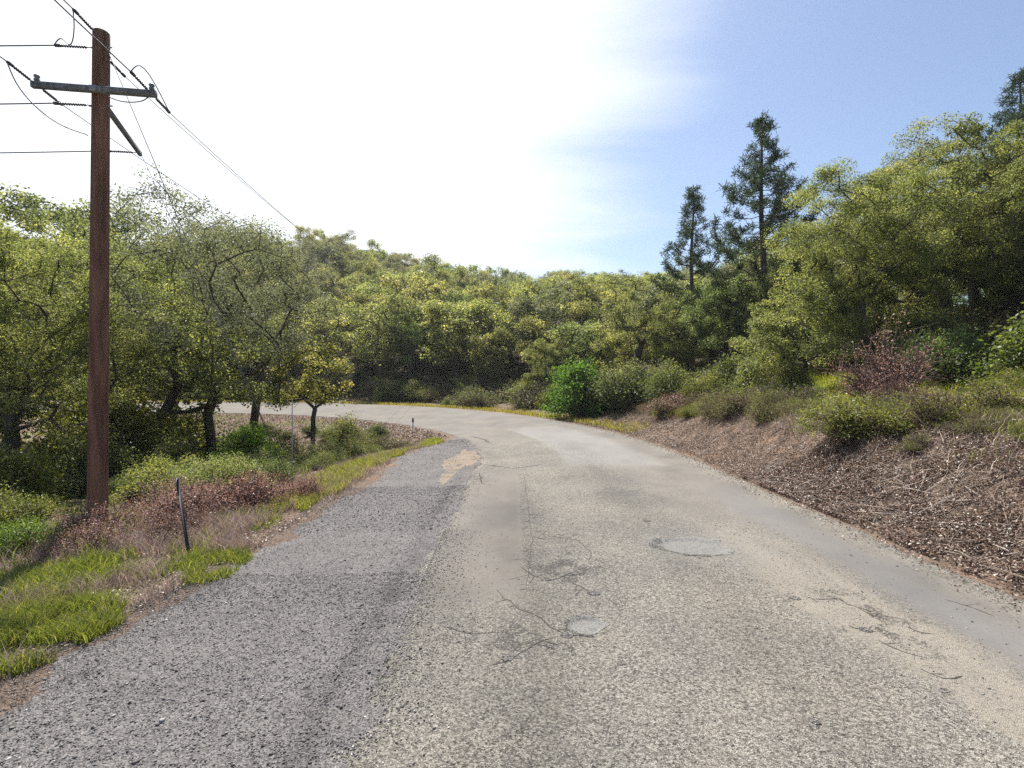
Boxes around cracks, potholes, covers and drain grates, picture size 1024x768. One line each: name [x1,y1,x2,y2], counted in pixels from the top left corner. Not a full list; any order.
crack [490,592,594,666]
crack [520,534,596,596]
crack [801,595,961,679]
